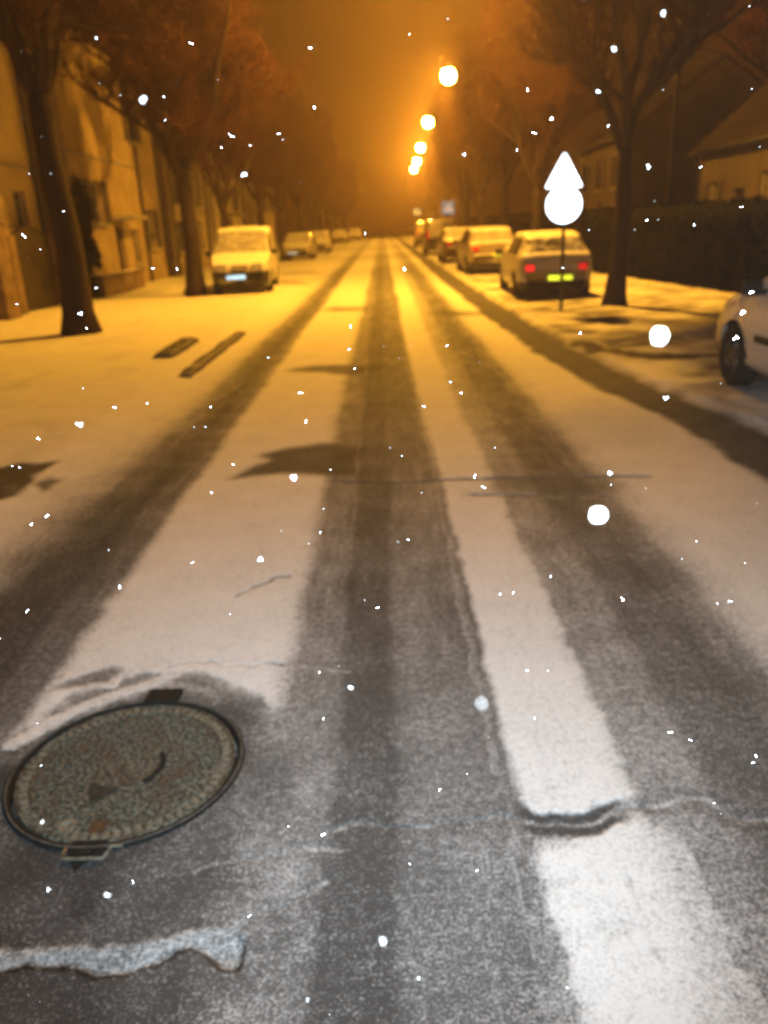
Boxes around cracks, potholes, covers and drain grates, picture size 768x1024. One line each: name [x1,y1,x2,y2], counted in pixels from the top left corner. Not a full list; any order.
crack [163,659,352,674]
crack [230,573,295,598]
crack [188,794,768,928]
manhole cover [2,688,245,872]
